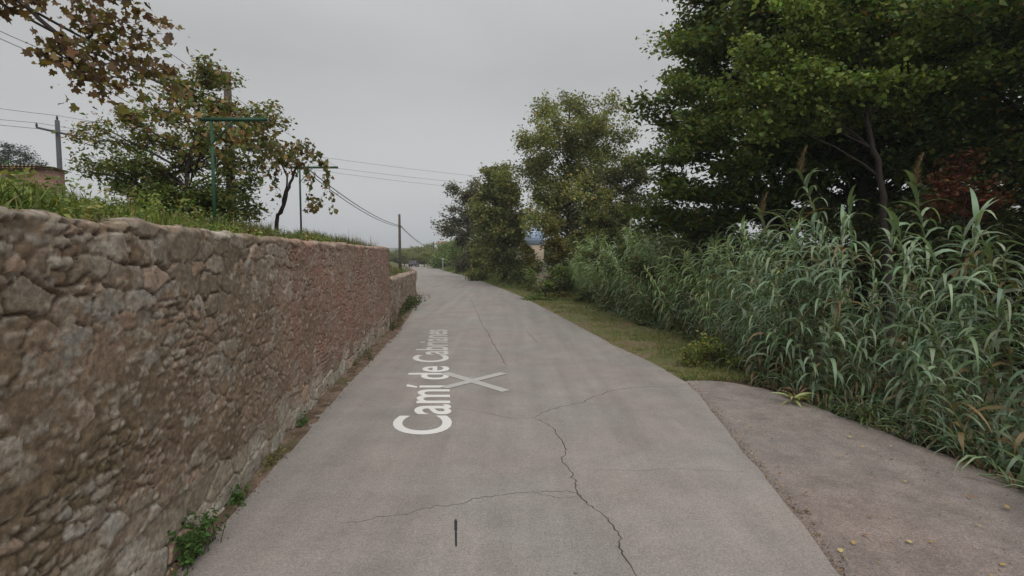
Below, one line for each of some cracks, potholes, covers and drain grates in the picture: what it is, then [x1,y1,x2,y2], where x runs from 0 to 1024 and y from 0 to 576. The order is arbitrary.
crack [343,386,673,575]
